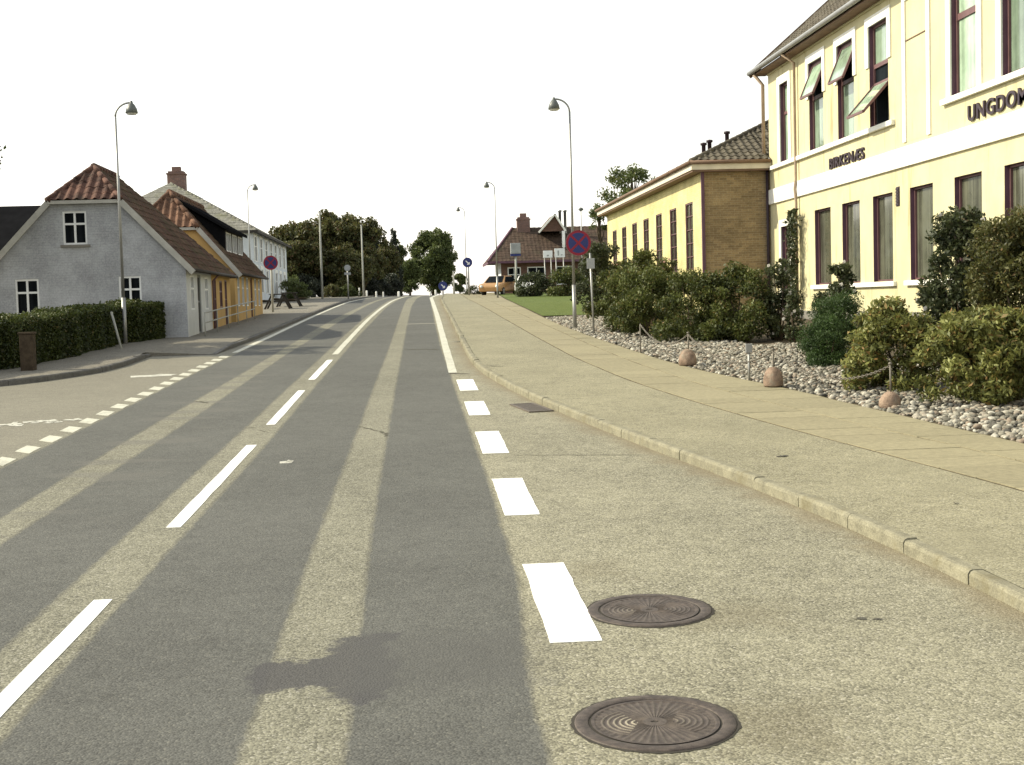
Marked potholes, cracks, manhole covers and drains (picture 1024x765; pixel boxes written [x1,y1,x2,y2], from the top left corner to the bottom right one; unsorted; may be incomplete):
manhole cover [570,695,741,754]
manhole cover [587,594,715,628]
